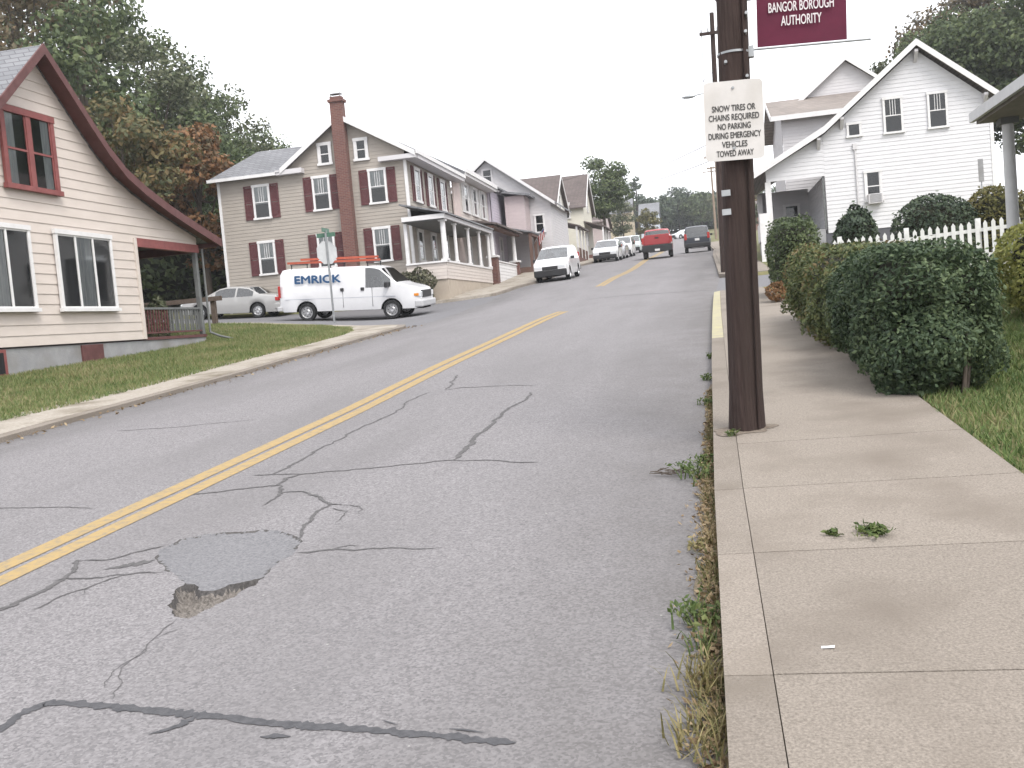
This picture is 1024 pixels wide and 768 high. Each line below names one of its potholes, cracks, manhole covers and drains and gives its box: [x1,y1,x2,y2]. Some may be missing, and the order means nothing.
pothole [167,576,265,619]
crack [0,545,164,610]
crack [197,375,532,553]
crack [104,620,177,696]
